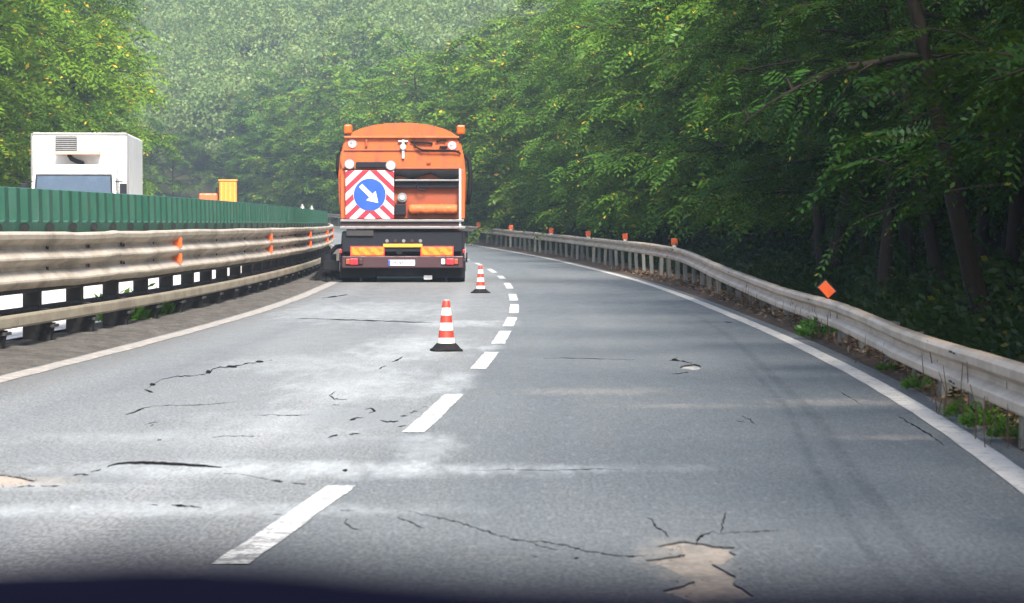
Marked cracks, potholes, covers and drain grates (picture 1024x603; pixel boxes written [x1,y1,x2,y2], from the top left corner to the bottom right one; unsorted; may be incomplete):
pothole [637,537,747,575]
crack [900,417,945,446]
pothole [0,469,38,488]
crack [397,510,647,559]
crack [223,473,306,485]
crack [328,406,427,438]
crack [125,360,269,441]
